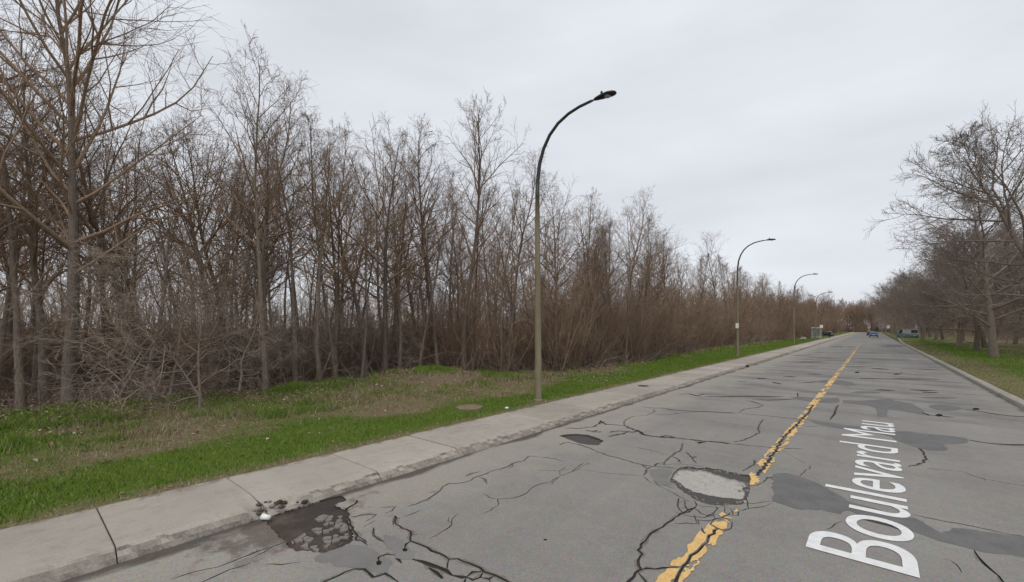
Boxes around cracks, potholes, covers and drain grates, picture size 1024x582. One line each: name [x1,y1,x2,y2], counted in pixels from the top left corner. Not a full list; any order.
crack [173,540,300,582]
pothole [560,434,604,445]
pothole [670,466,751,506]
pothole [266,496,354,553]
crack [323,355,948,582]
crack [909,448,1023,486]
